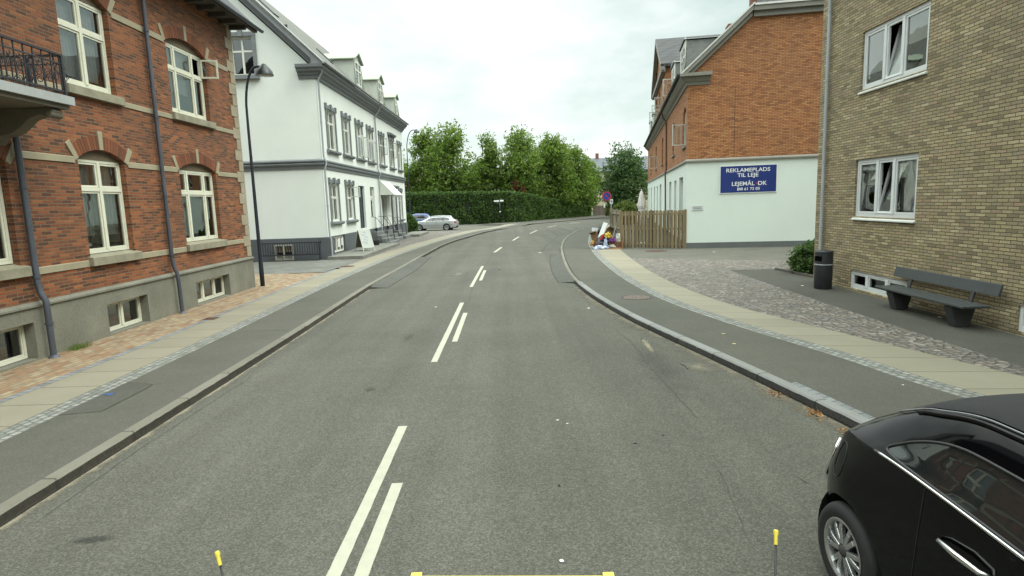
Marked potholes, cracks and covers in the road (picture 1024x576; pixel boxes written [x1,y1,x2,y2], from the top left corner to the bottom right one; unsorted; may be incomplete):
crack [613,327,697,418]
crack [718,470,750,543]
